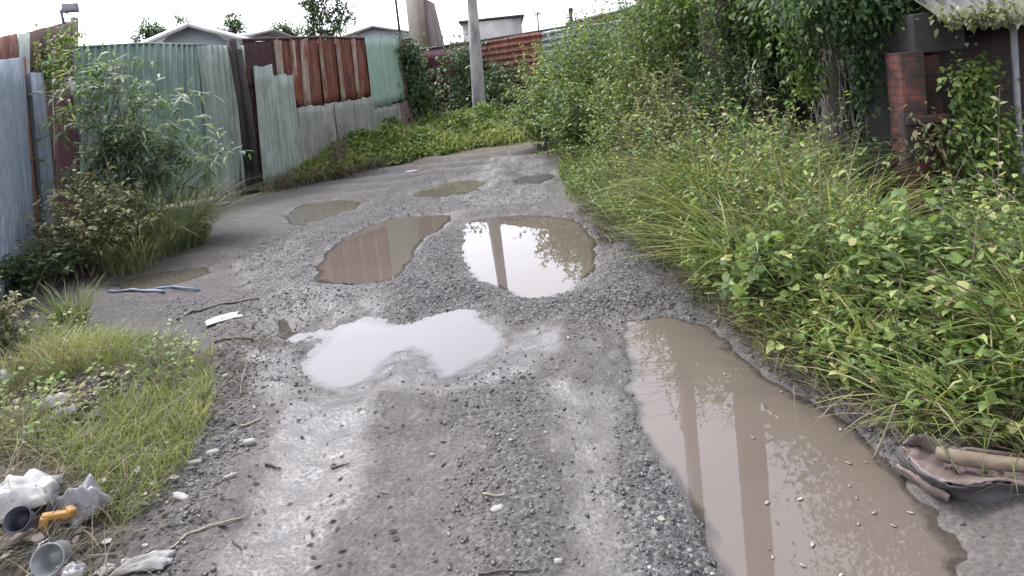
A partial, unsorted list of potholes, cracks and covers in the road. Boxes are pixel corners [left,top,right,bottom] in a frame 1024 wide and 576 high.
pothole [402,174,495,198]
pothole [504,168,560,185]
pothole [450,211,609,299]
pothole [300,209,463,287]
pothole [279,295,527,399]
pothole [274,194,370,227]
pothole [98,260,225,291]
pothole [602,303,1001,576]
